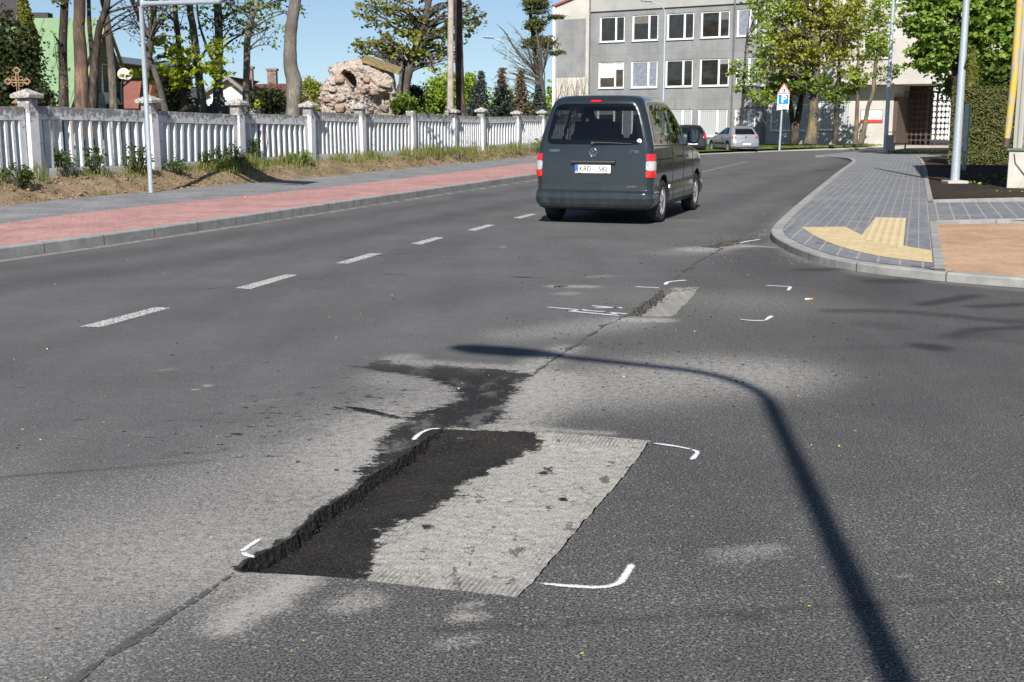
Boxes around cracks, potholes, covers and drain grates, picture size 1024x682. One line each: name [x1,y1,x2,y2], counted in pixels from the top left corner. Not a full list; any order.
pothole [237,428,650,597]
